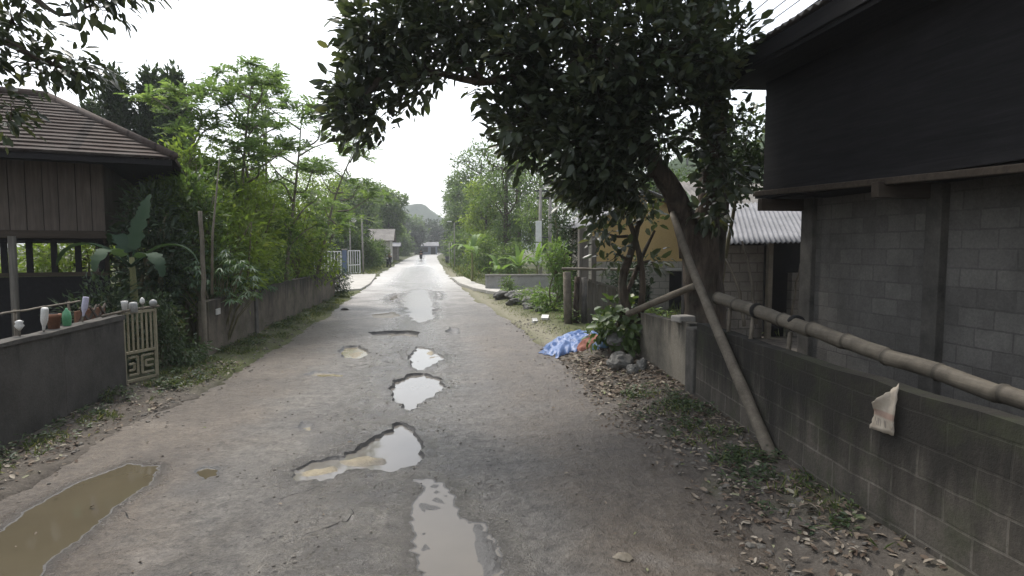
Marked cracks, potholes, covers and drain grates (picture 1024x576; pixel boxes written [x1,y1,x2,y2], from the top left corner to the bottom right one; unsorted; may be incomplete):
pothole [291,422,426,481]
pothole [337,345,372,359]
pothole [400,289,436,323]
pothole [388,373,447,411]
crack [283,508,354,545]
pothole [407,346,446,371]
pothole [194,466,221,480]
pothole [409,478,505,576]
pothole [0,463,160,576]
